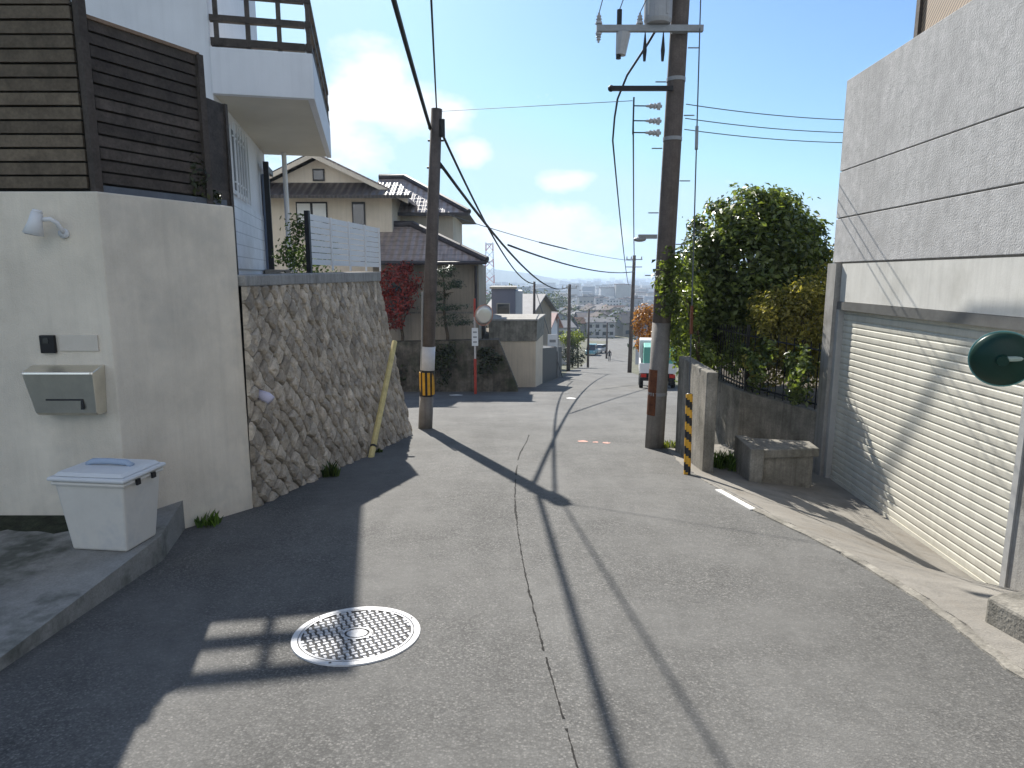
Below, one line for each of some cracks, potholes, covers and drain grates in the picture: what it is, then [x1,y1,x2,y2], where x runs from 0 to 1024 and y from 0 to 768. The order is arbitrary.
manhole cover [291,606,421,667]
crack [514,435,579,768]
